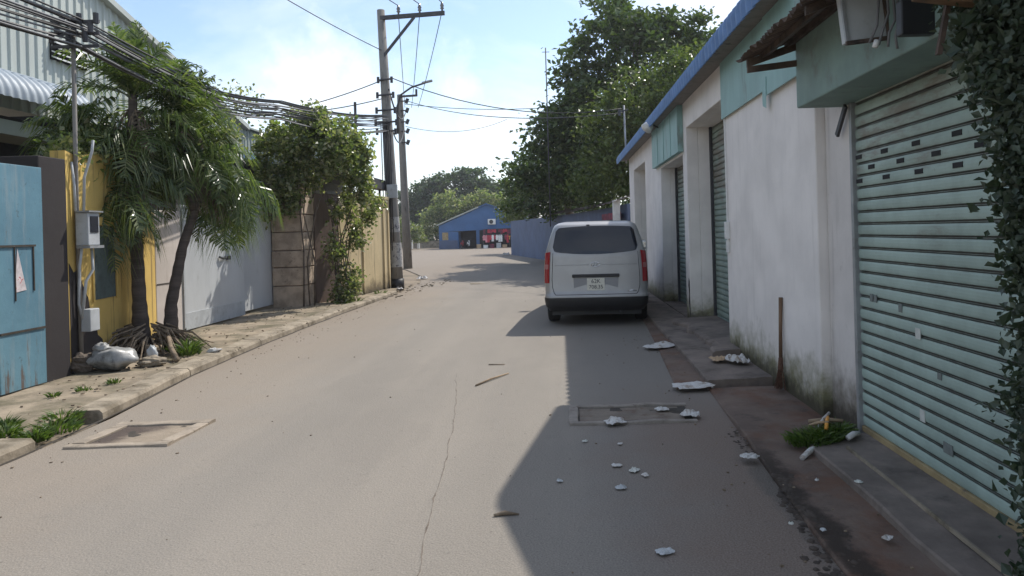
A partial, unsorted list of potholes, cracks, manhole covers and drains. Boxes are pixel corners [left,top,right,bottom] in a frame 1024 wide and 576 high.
crack [416,373,458,576]
manhole cover [569,402,698,426]
manhole cover [63,419,216,450]
